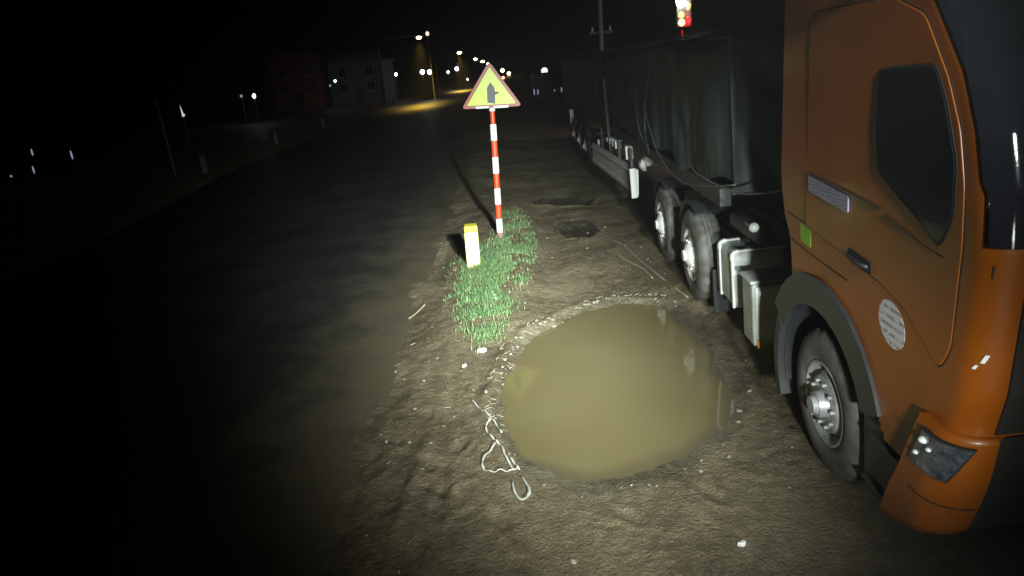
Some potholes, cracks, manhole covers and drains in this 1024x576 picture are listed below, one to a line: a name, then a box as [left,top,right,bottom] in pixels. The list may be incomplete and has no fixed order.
pothole [532,192,596,206]
pothole [558,221,600,238]
pothole [490,295,754,495]
